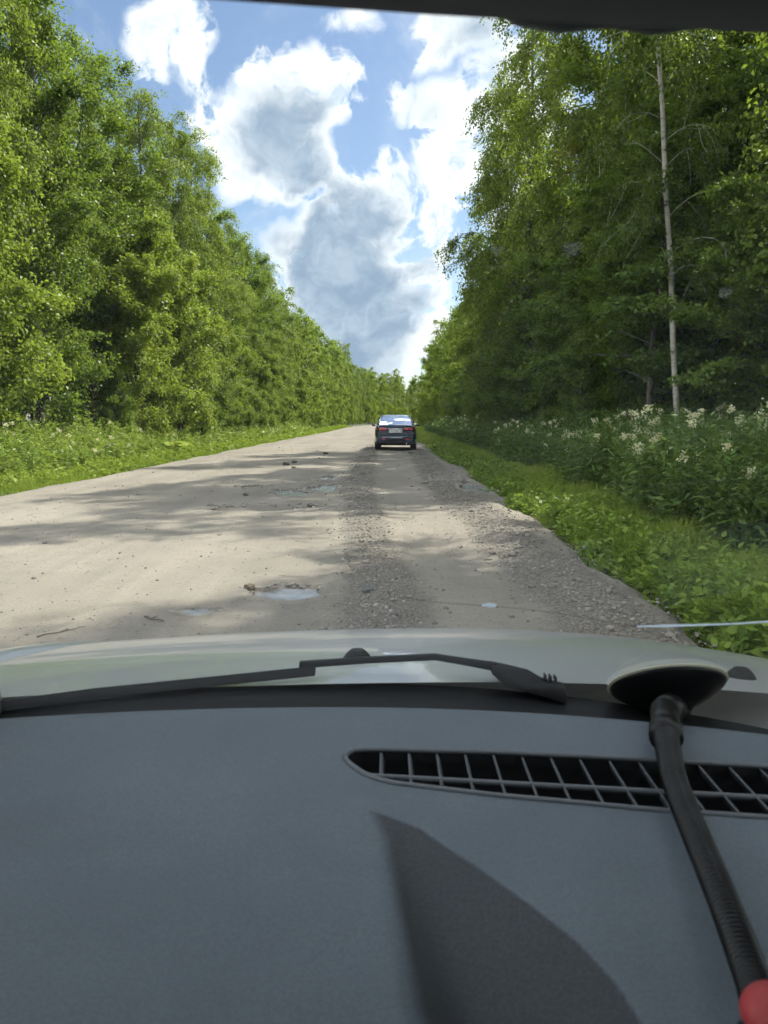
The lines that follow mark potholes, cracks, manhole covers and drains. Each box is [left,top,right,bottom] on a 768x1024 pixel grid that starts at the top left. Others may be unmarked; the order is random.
pothole [262,488,320,497]
pothole [230,581,343,604]
pothole [168,606,231,617]
pothole [298,482,345,493]
